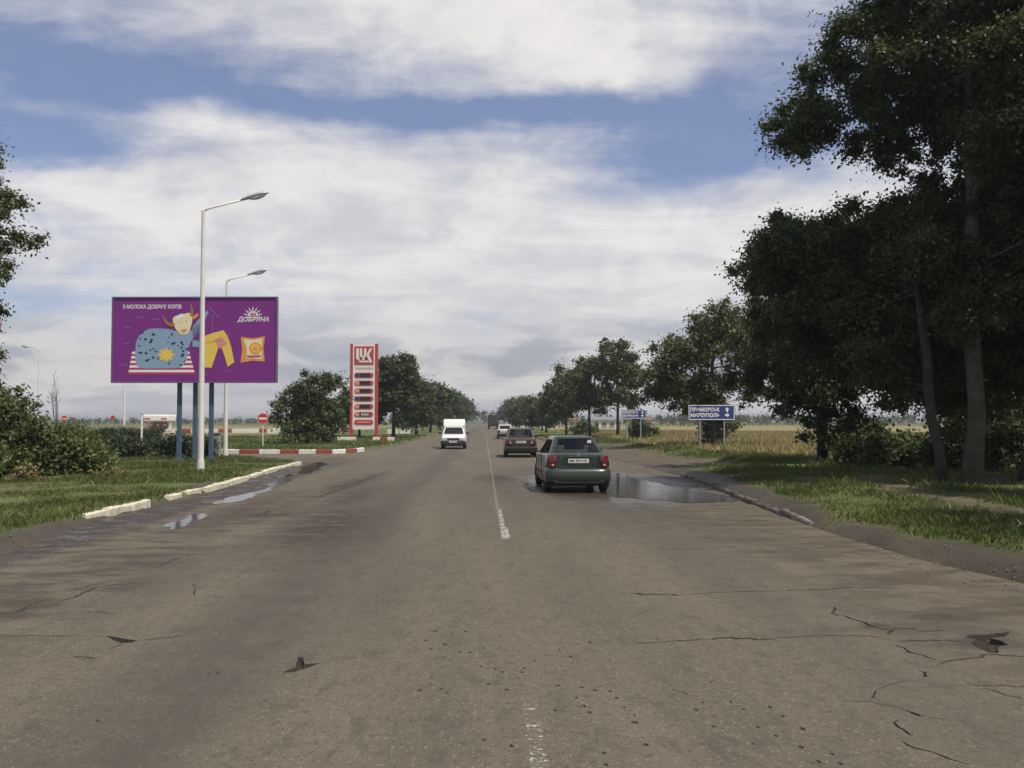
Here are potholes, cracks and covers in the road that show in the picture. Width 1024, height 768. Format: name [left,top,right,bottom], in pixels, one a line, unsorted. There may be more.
pothole [106,635,138,643]
pothole [966,632,1010,653]
crack [0,554,194,614]
crack [641,607,1024,764]
pothole [283,657,319,673]
